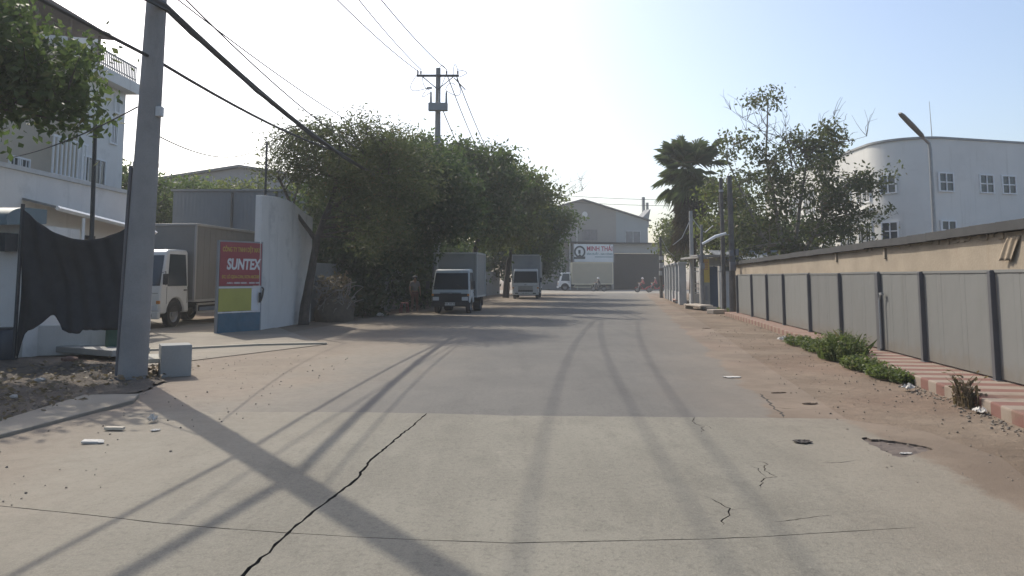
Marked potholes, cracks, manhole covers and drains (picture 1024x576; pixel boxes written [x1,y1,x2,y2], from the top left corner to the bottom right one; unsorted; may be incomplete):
pothole [862,437,933,457]
crack [4,413,917,576]
